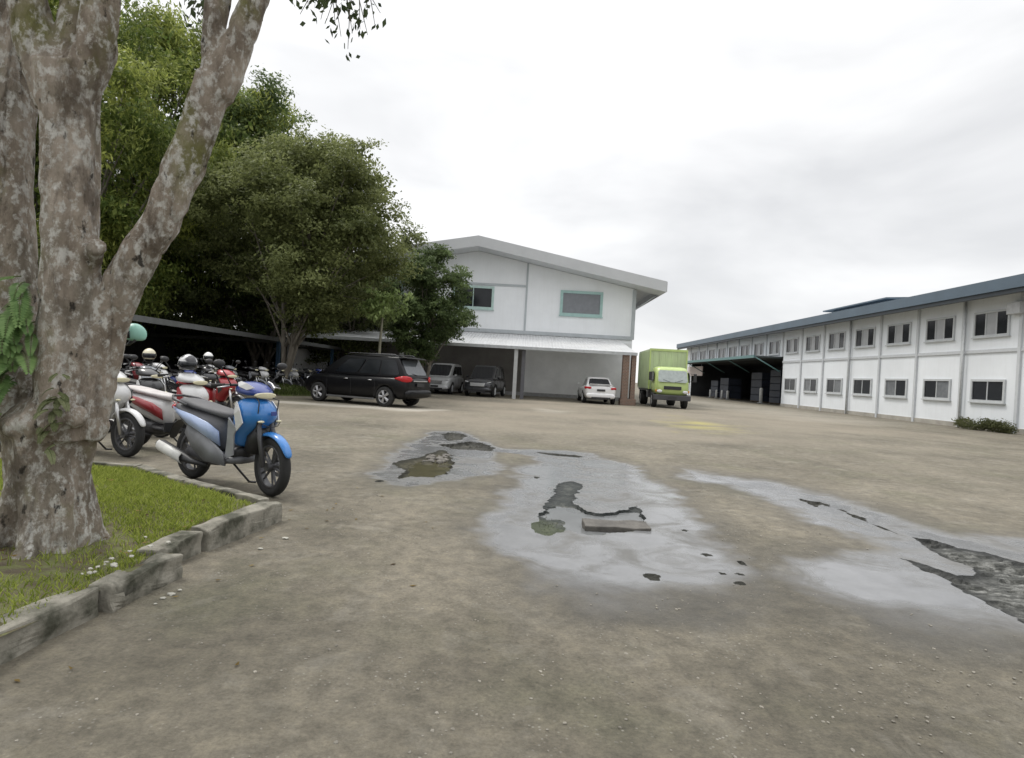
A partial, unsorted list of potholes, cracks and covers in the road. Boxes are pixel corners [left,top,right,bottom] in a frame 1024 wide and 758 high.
pothole [531,481,651,536]
crack [800,499,897,534]
pothole [392,450,455,479]
pothole [643,573,661,581]
pothole [900,537,1024,624]
pothole [439,442,496,451]
